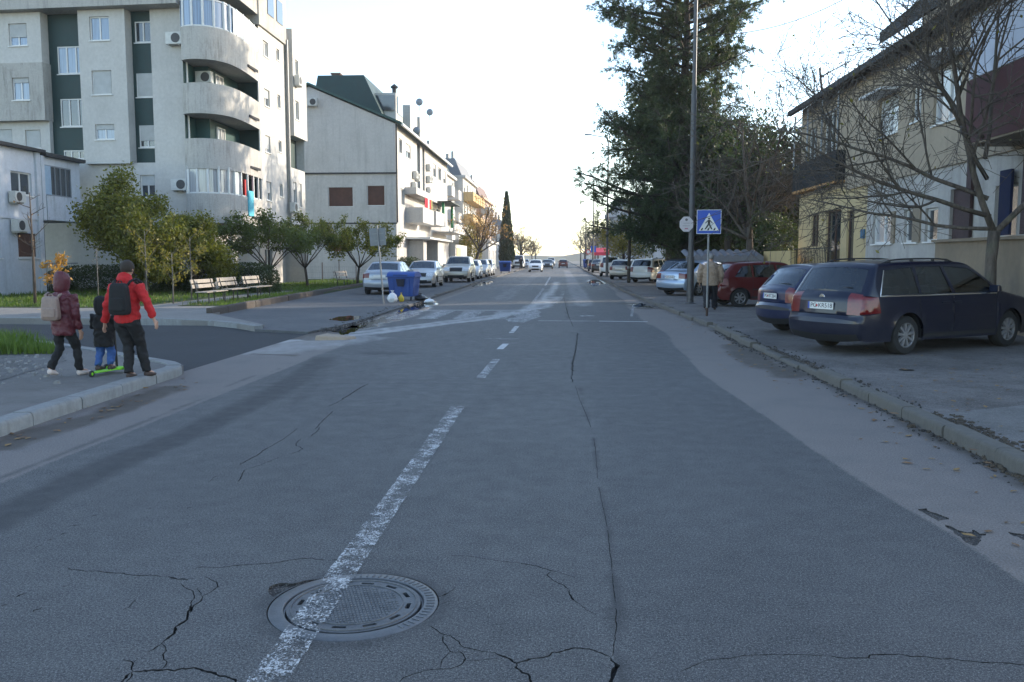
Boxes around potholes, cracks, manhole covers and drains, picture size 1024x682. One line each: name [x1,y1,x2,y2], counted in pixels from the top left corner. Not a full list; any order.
crack [400,626,620,682]
manhole cover [267,574,439,642]
crack [211,384,368,482]
pothole [918,508,949,521]
crack [68,558,344,682]
crack [451,555,592,613]
pothole [945,525,986,546]
crack [680,654,1023,672]
